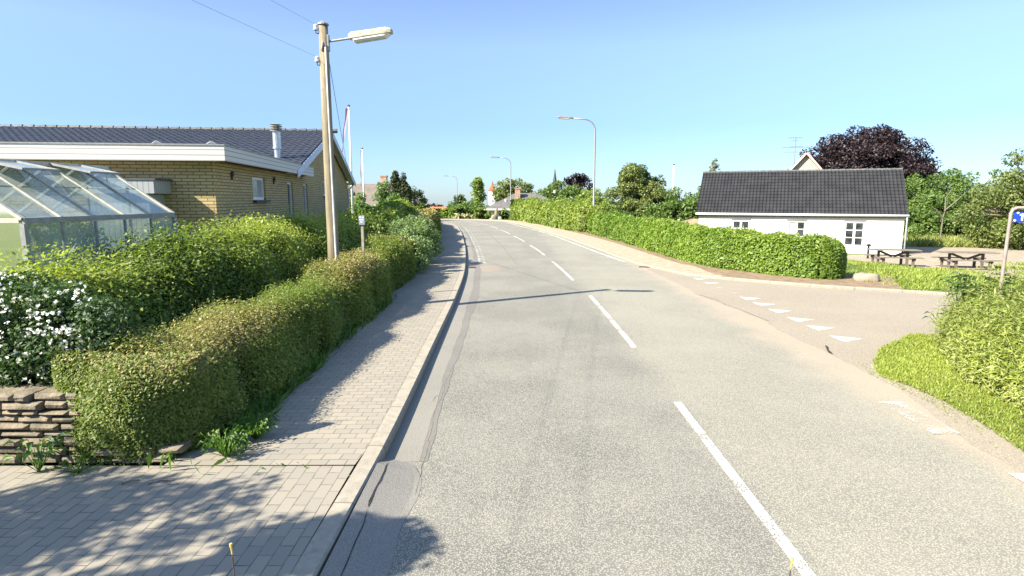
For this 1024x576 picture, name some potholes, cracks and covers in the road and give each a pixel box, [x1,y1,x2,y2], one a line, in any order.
crack [341,463,388,575]
